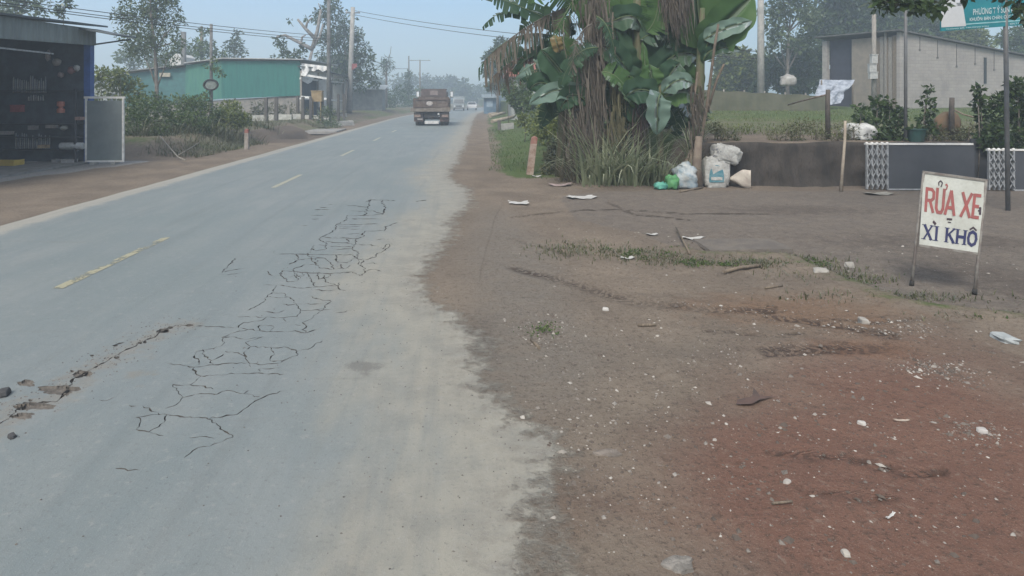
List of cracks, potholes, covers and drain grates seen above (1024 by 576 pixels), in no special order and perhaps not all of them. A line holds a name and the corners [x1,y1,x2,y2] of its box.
crack [130,200,395,456]
crack [0,324,193,424]
